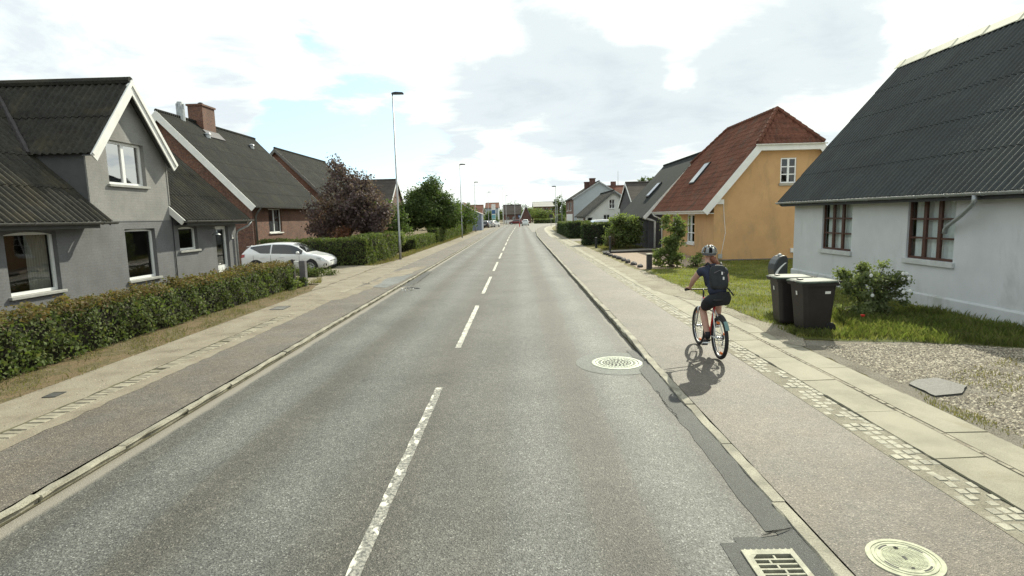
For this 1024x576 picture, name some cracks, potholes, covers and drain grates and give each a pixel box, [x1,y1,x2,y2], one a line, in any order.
manhole cover [592,356,642,370]
drain grate [741,548,814,576]
manhole cover [865,539,947,576]
